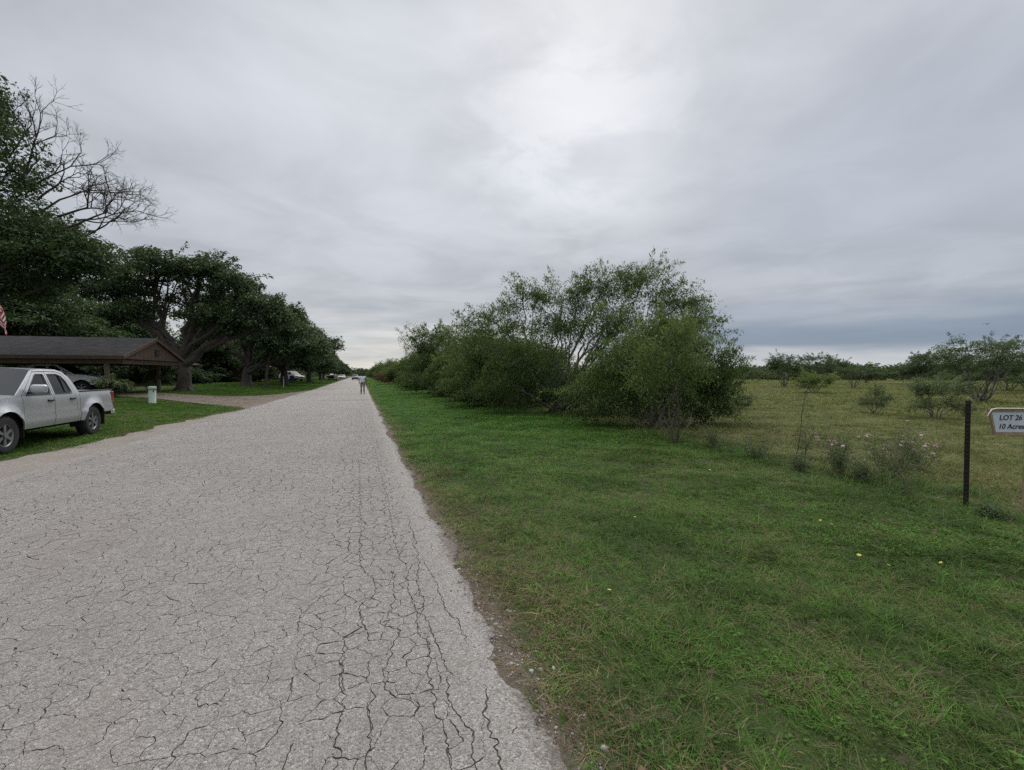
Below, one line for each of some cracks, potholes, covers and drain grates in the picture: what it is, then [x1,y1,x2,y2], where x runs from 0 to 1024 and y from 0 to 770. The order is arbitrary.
crack [265,406,503,770]
